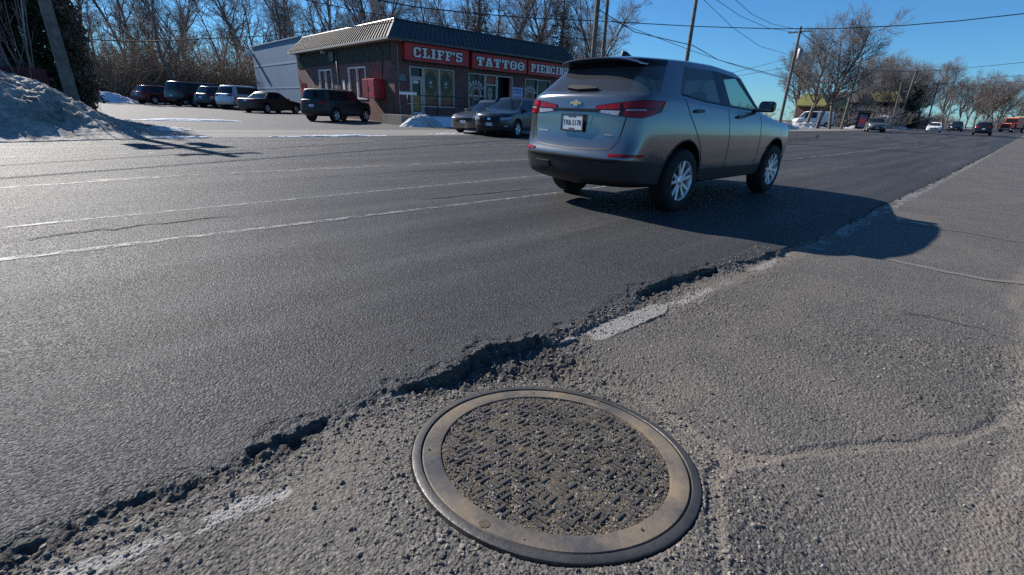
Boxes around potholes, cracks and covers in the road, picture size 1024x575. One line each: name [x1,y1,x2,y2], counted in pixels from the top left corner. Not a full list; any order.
manhole cover [412,386,702,569]
pothole [0,523,84,575]
pothole [403,334,592,398]
pothole [97,467,226,524]
crack [20,215,237,241]
crack [877,257,1024,284]
pothole [244,416,331,466]
pothole [633,266,721,304]
